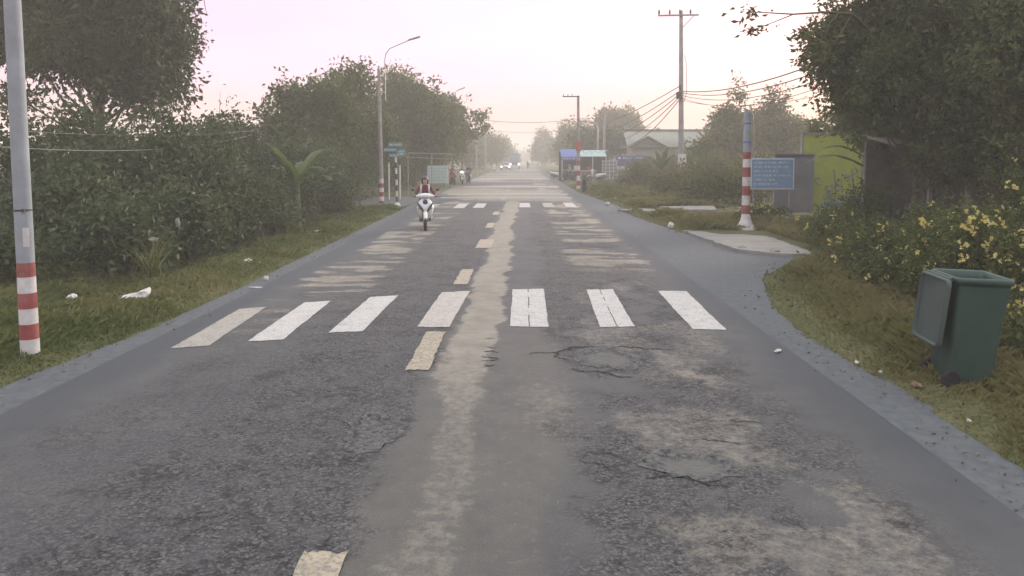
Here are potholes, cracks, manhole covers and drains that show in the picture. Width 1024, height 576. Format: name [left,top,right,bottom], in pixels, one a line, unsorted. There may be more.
crack [530,345,673,378]
pothole [343,410,409,454]
crack [646,474,727,486]
